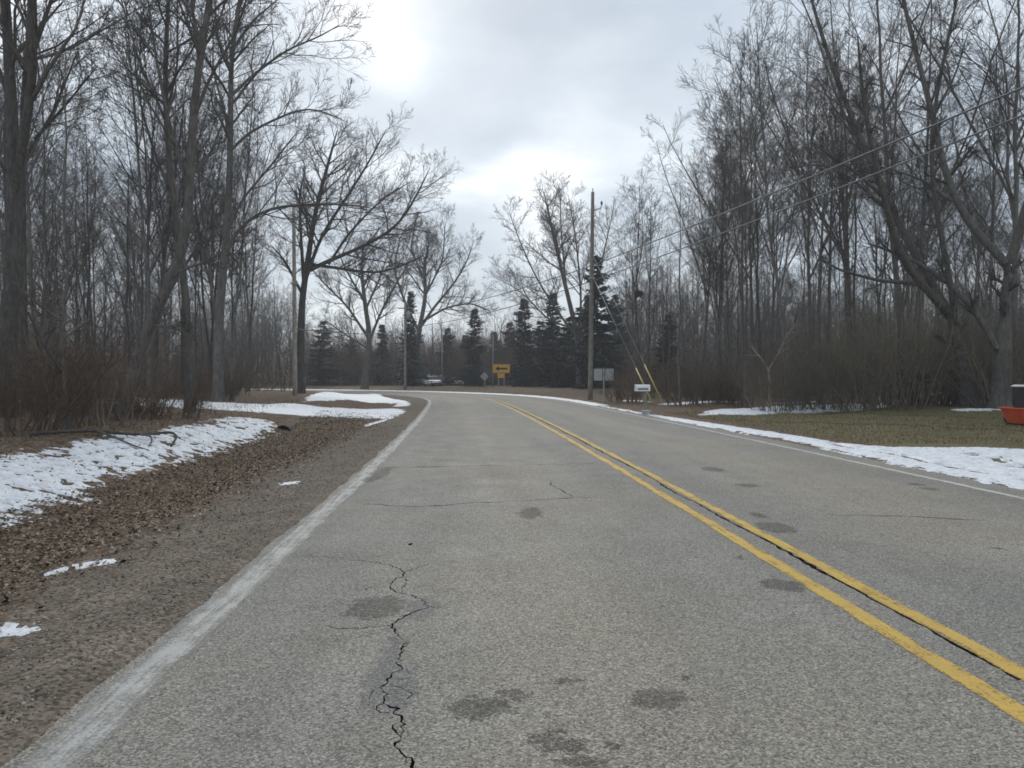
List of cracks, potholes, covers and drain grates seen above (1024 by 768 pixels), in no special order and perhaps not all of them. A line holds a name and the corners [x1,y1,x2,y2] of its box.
crack [379,463,591,507]
crack [311,556,435,768]
